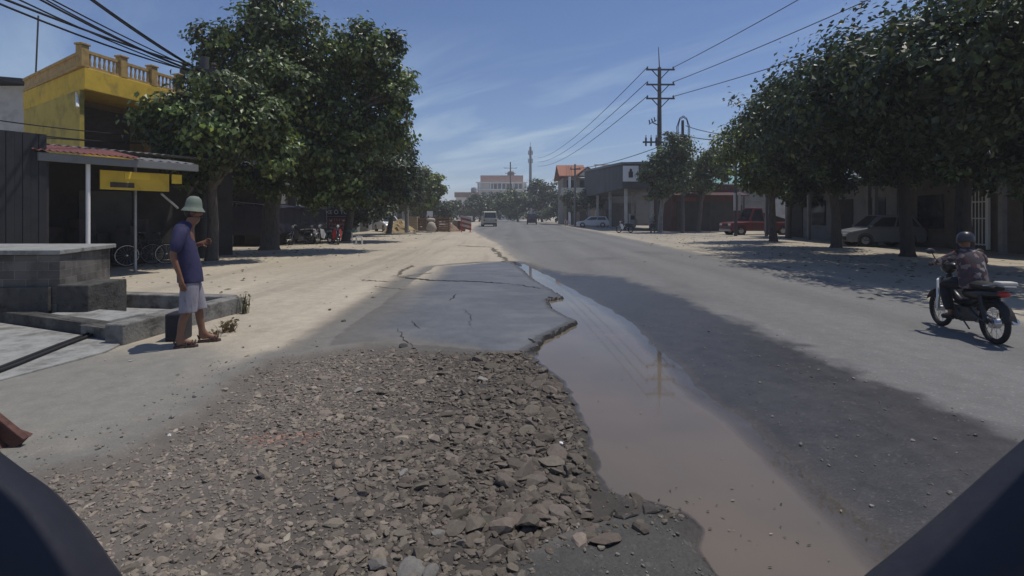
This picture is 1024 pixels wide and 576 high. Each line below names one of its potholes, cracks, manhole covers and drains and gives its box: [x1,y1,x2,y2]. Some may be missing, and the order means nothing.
crack [360,265,553,324]
pothole [23,343,664,576]
pothole [512,261,910,576]
